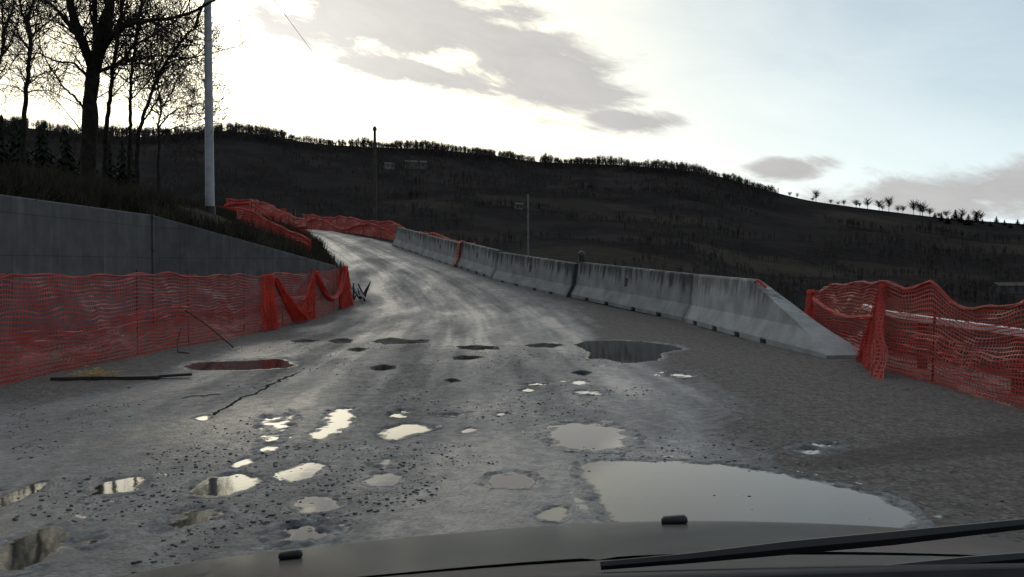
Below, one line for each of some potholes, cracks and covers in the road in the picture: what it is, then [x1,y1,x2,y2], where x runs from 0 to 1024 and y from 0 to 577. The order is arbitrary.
pothole [173,357,305,371]
pothole [286,493,356,521]
pothole [554,456,943,529]
pothole [0,478,57,511]
pothole [178,470,283,499]
pothole [0,515,87,577]
pothole [472,469,546,490]
pothole [528,503,576,524]
pothole [356,471,410,487]
pothole [266,459,333,484]
pothole [66,472,170,508]
pothole [568,339,691,363]
